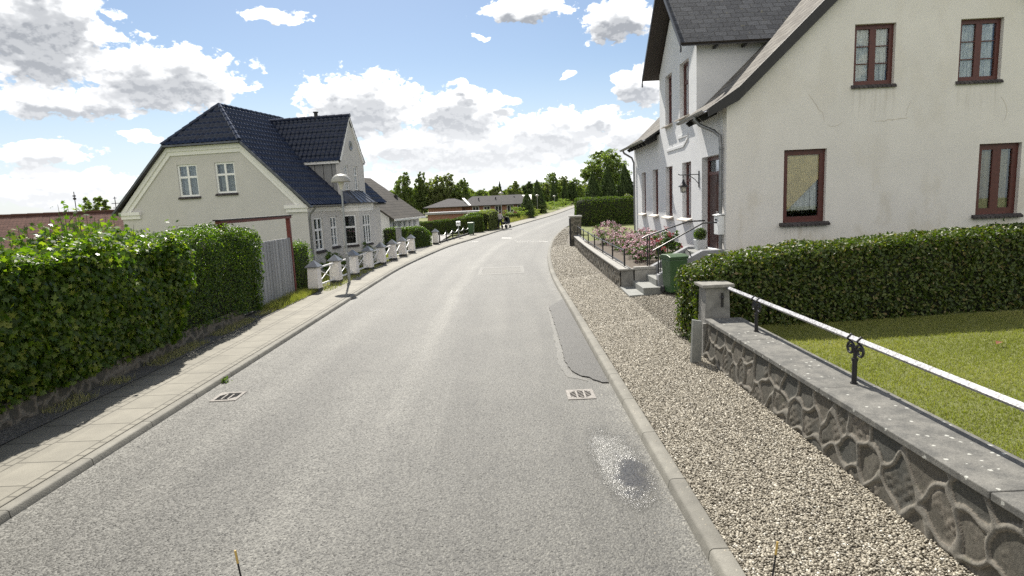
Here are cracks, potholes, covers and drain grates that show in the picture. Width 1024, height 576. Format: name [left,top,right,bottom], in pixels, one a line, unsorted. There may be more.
drain grate [209,391,247,402]
drain grate [565,389,596,400]
